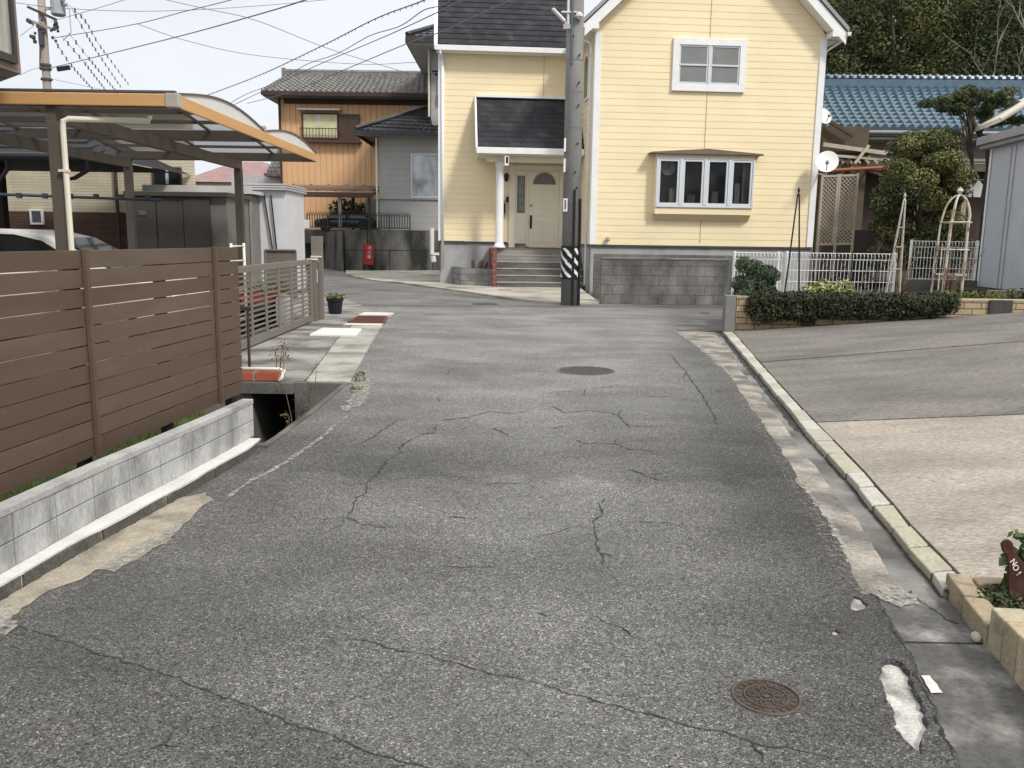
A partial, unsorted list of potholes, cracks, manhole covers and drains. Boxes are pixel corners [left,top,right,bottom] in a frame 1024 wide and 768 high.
crack [13,623,429,768]
manhole cover [731,679,802,716]
manhole cover [557,366,615,376]
pothole [878,658,930,753]
crack [672,355,720,431]
crack [327,411,528,531]
crack [544,498,614,570]
crack [553,385,664,451]
